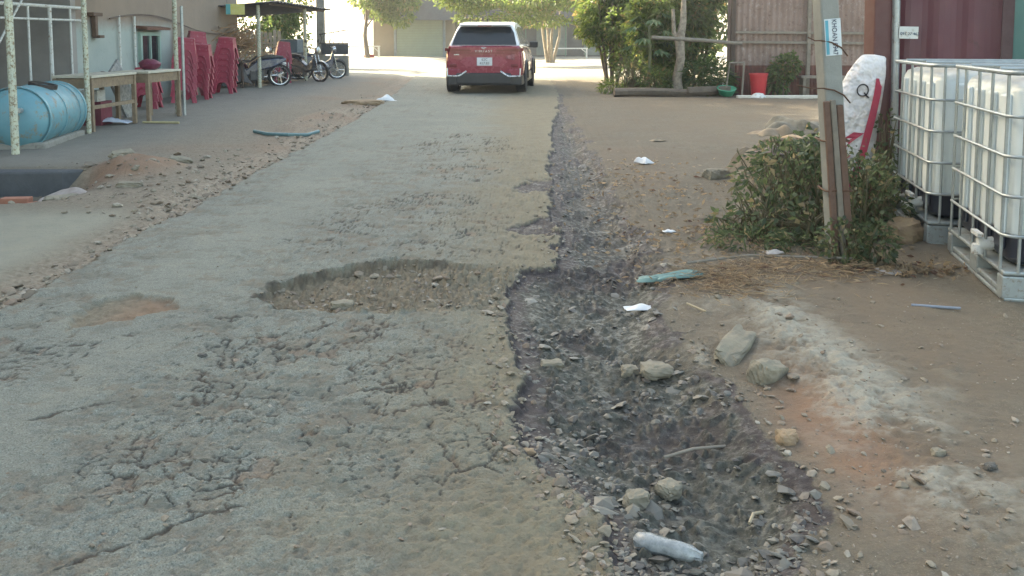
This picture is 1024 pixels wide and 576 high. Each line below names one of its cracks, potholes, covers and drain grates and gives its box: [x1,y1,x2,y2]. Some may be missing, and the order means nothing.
pothole [503,215,560,238]
pothole [512,177,553,193]
crack [51,314,509,571]
pothole [250,257,523,314]
crack [26,395,140,421]
